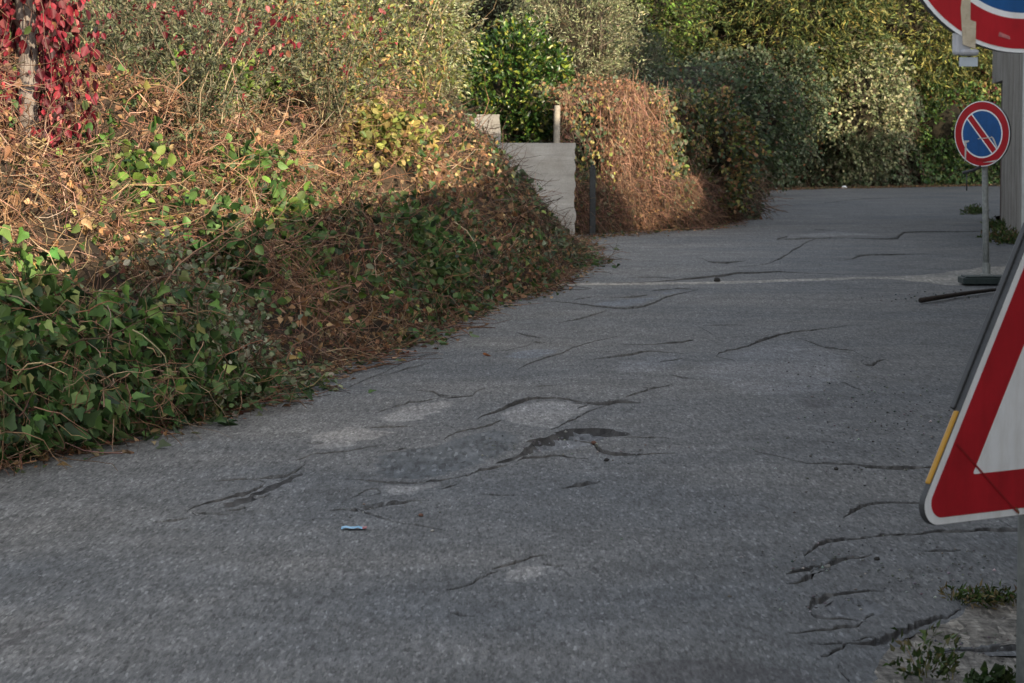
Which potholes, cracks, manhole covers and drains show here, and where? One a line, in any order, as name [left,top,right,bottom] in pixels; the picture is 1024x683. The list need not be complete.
crack [154,229,981,531]
pothole [496,428,631,464]
crack [785,500,1018,683]
crack [447,554,564,591]
